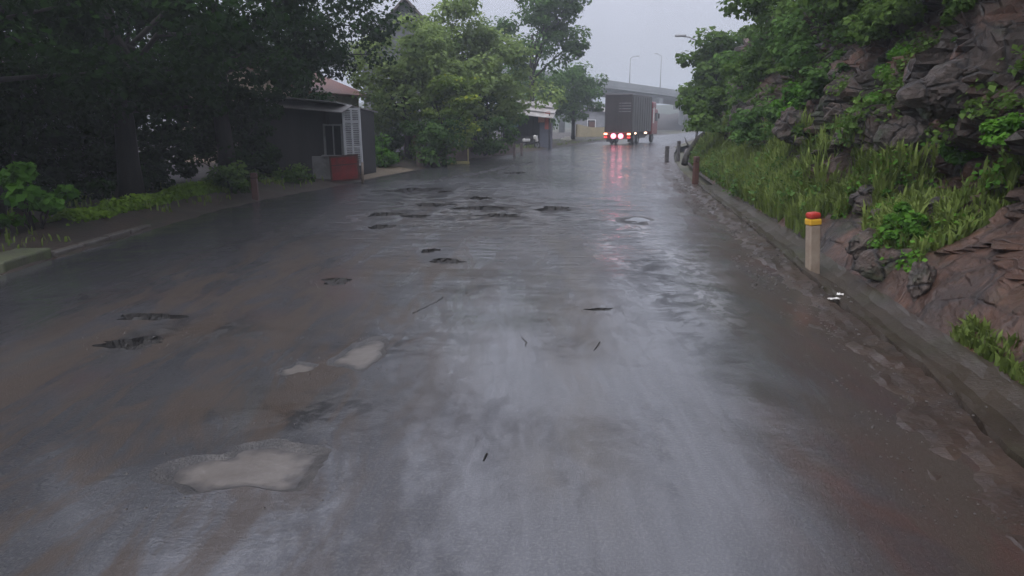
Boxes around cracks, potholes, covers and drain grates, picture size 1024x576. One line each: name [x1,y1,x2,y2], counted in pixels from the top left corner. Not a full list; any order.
pothole [117,313,190,321]
pothole [614,216,655,225]
pothole [321,278,353,286]
pothole [92,336,164,350]
